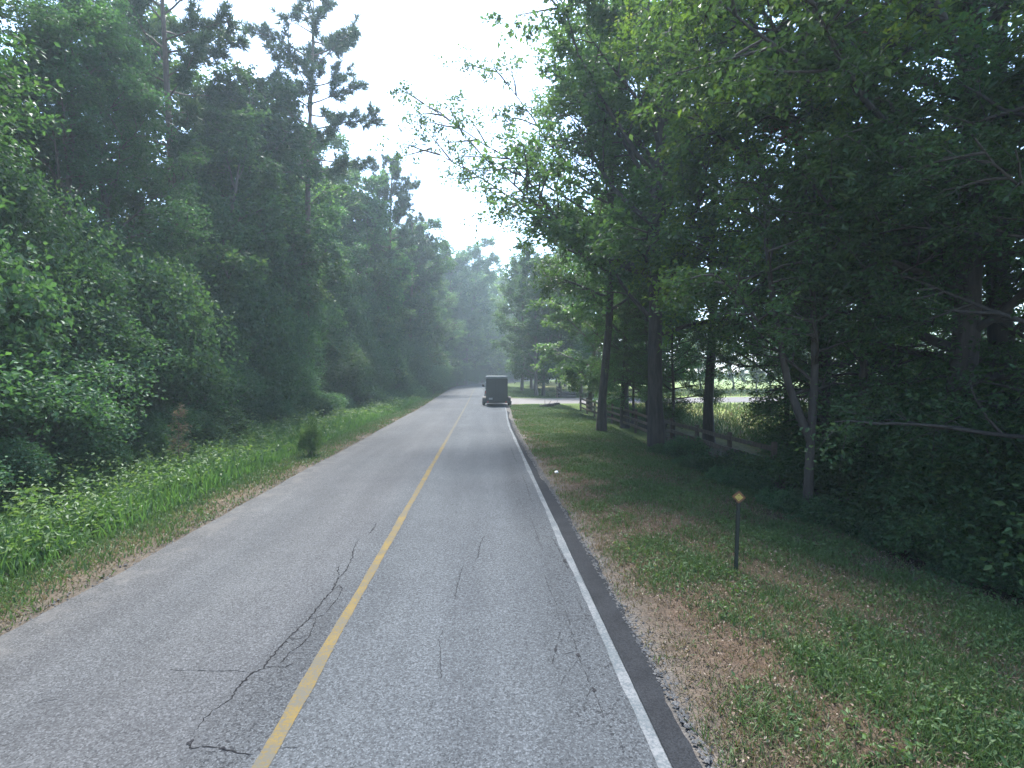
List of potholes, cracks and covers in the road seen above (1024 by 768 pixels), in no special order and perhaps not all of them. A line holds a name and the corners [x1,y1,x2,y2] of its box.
crack [511,450,604,717]
crack [454,536,485,599]
crack [189,745,258,756]
crack [166,524,376,740]
